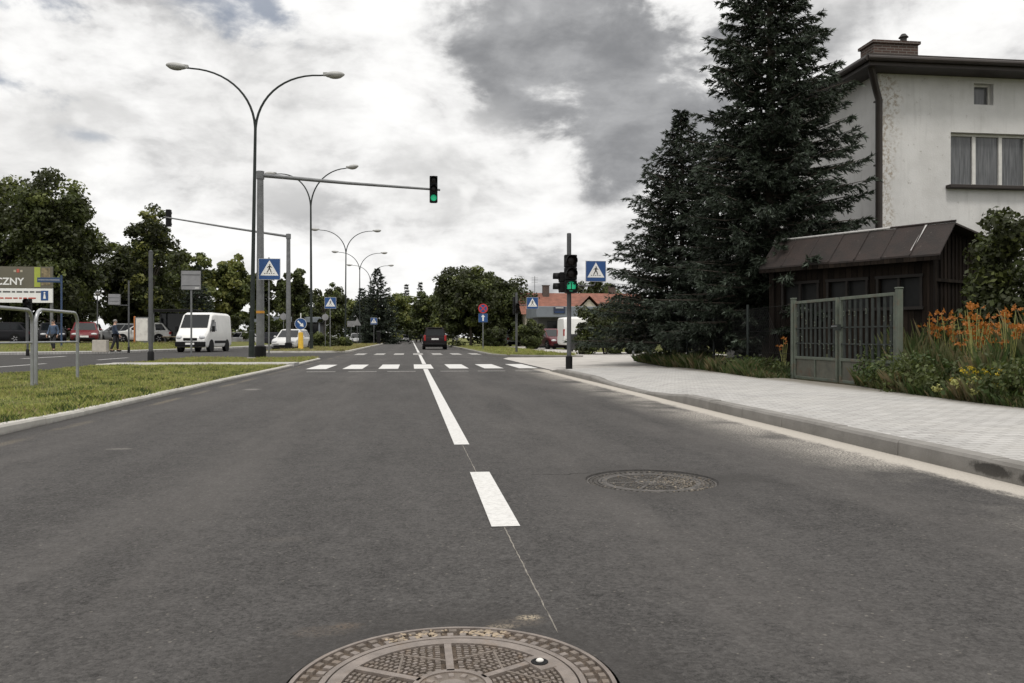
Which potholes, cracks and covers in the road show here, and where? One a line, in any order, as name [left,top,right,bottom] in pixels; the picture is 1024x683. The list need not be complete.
manhole cover [289,626,617,683]
manhole cover [586,469,719,493]
